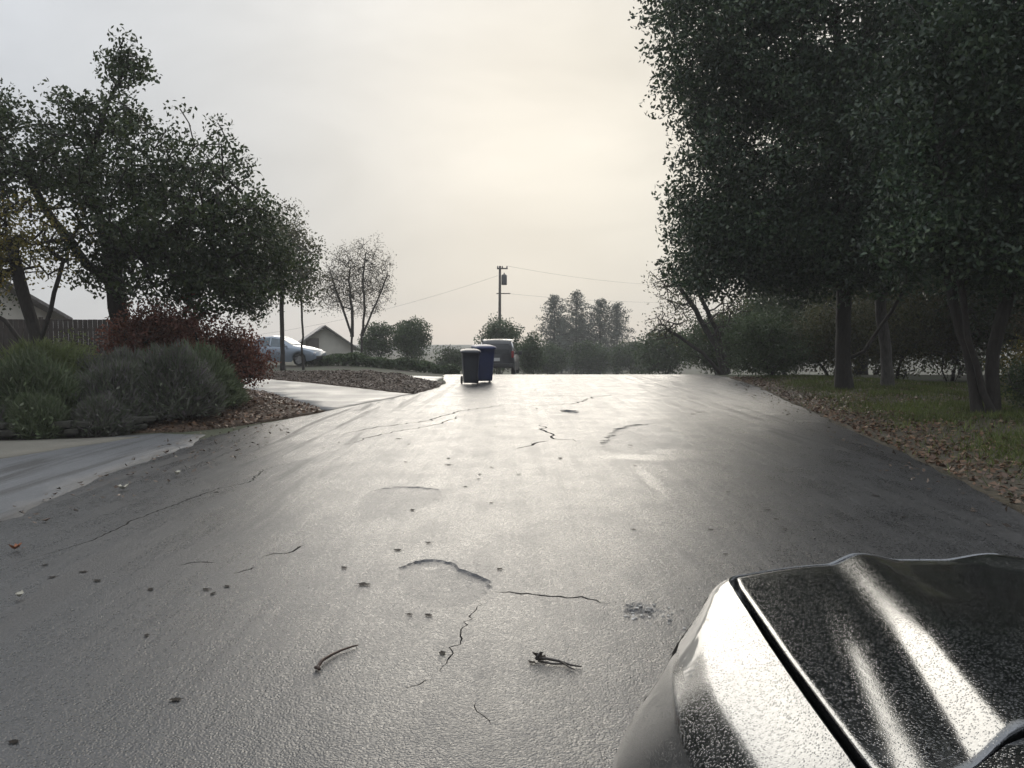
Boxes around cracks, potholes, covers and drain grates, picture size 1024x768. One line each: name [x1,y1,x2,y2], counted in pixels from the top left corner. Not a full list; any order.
pothole [615,601,686,629]
crack [517,424,577,449]
crack [402,602,483,689]
pothole [395,559,493,609]
crack [500,591,607,604]
crack [233,545,303,574]
pothole [351,486,442,518]
